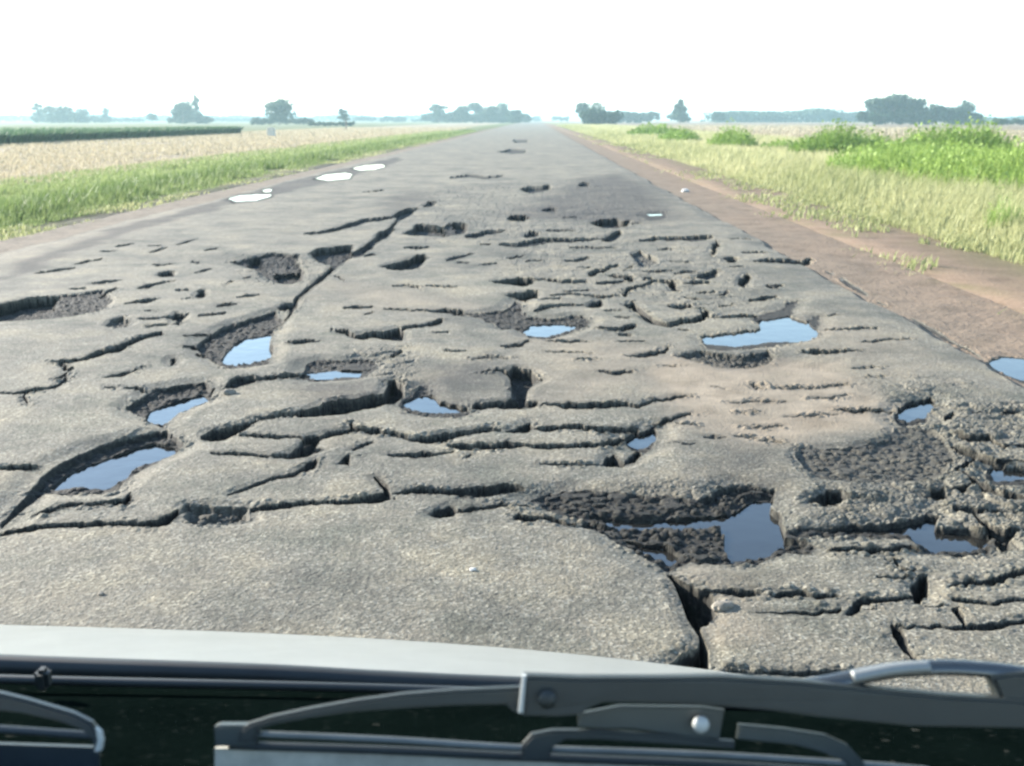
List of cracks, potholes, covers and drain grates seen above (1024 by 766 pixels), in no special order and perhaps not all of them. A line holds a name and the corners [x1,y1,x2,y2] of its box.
pothole [464,300,591,339]
crack [0,239,259,404]
pothole [125,381,216,429]
crack [0,491,180,537]
pothole [701,300,821,351]
pothole [301,358,379,382]
pothole [526,484,818,573]
pothole [783,512,1000,558]
crack [0,463,40,472]
pothole [398,384,472,419]
pothole [196,311,284,369]
crack [287,216,983,446]
